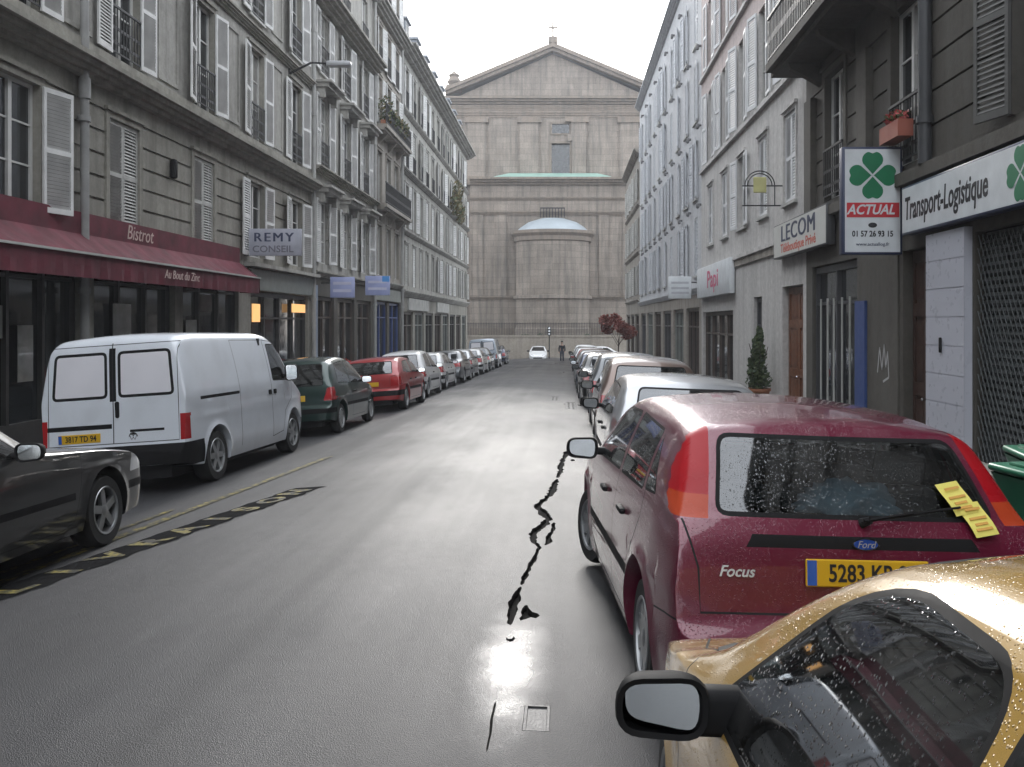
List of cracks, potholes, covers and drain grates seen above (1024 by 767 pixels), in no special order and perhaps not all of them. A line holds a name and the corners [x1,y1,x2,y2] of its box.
utility cover [522,705,550,732]
crack [486,702,496,752]
crack [520,451,575,585]
